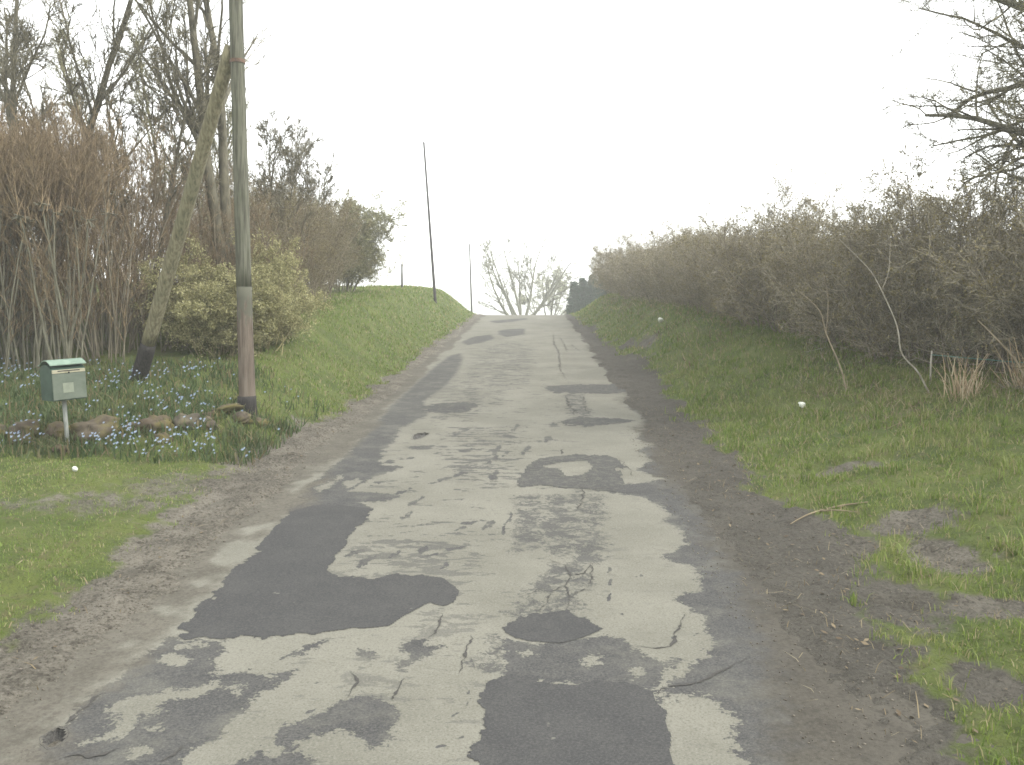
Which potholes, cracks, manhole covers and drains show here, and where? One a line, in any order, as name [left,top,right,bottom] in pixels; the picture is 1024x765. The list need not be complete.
pothole [39,726,69,750]
crack [459,636,473,672]
crack [529,559,594,611]
crack [637,614,685,648]
